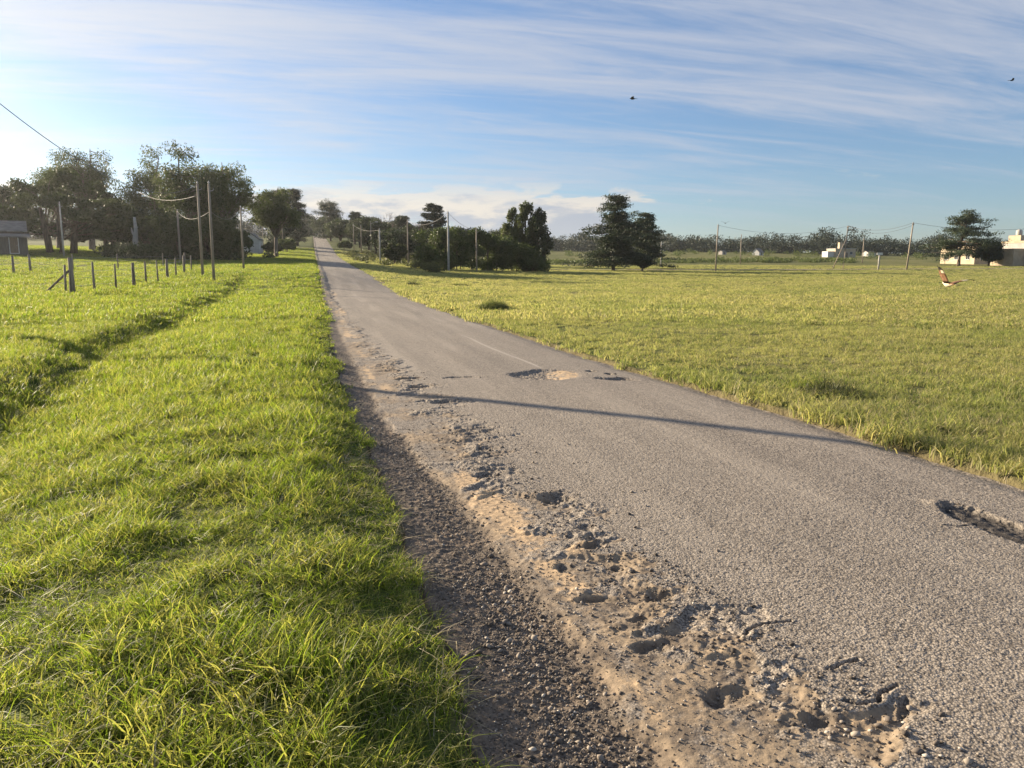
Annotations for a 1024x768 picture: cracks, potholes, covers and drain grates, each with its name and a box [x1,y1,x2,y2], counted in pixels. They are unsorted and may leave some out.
pothole [495,367,599,381]
pothole [926,497,1024,546]
pothole [894,694,913,725]
pothole [527,489,579,511]
pothole [698,677,769,712]
